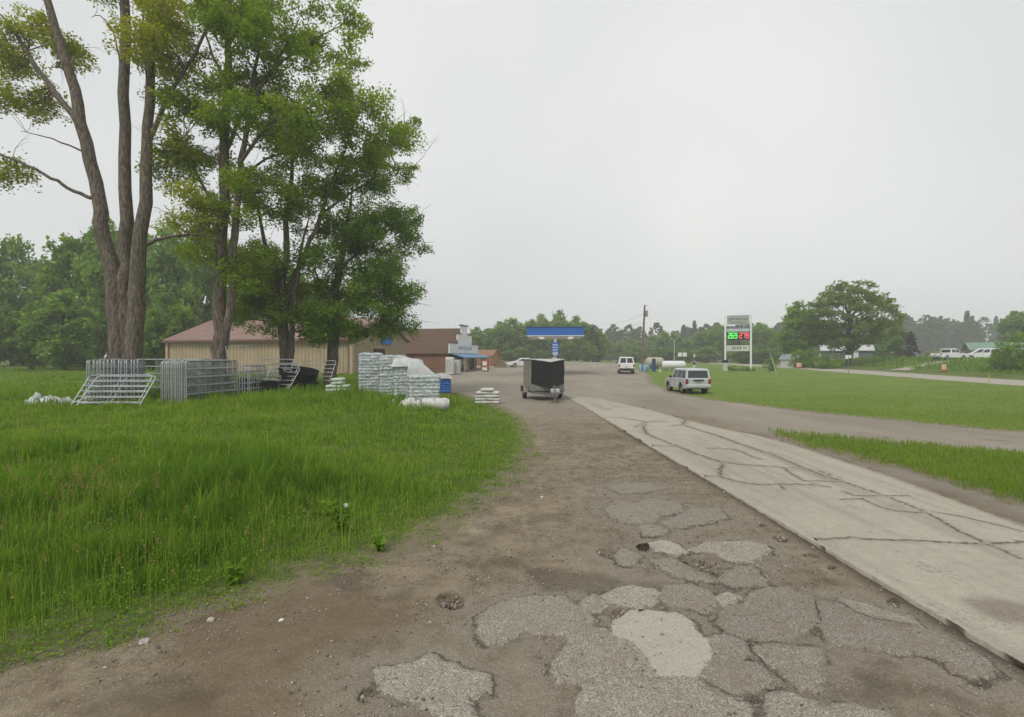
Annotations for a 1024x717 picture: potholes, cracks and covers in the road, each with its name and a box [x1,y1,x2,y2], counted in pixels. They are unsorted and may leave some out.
crack [651,549,688,562]
crack [599,408,1024,546]
pothole [423,587,477,617]
